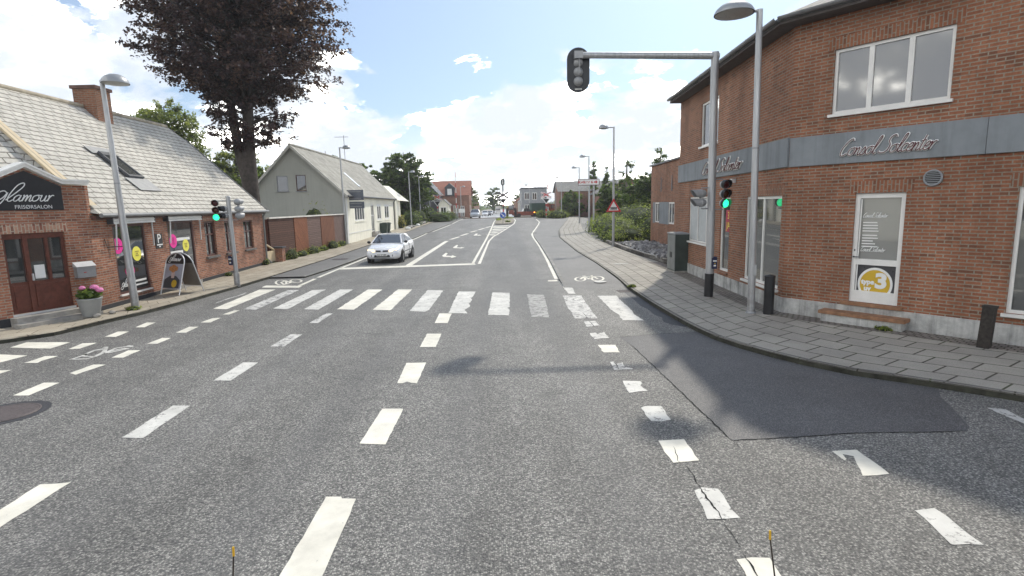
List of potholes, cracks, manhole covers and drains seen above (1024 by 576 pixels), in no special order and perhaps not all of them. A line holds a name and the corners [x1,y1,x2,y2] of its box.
crack [674,448,758,576]
manhole cover [0,400,52,424]
